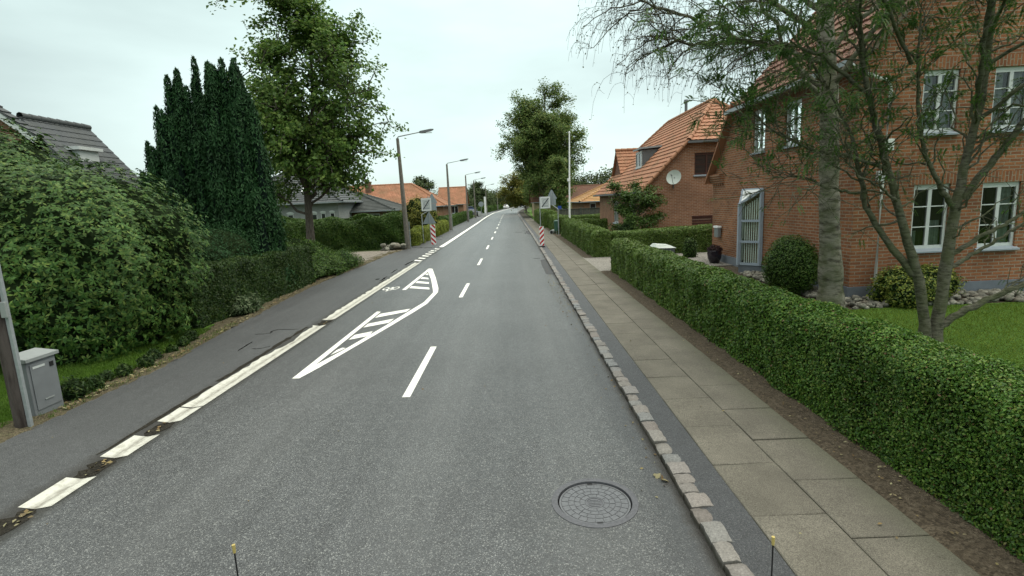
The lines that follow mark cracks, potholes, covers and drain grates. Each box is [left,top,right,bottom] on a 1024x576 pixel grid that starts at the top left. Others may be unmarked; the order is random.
manhole cover [552,478,639,528]
